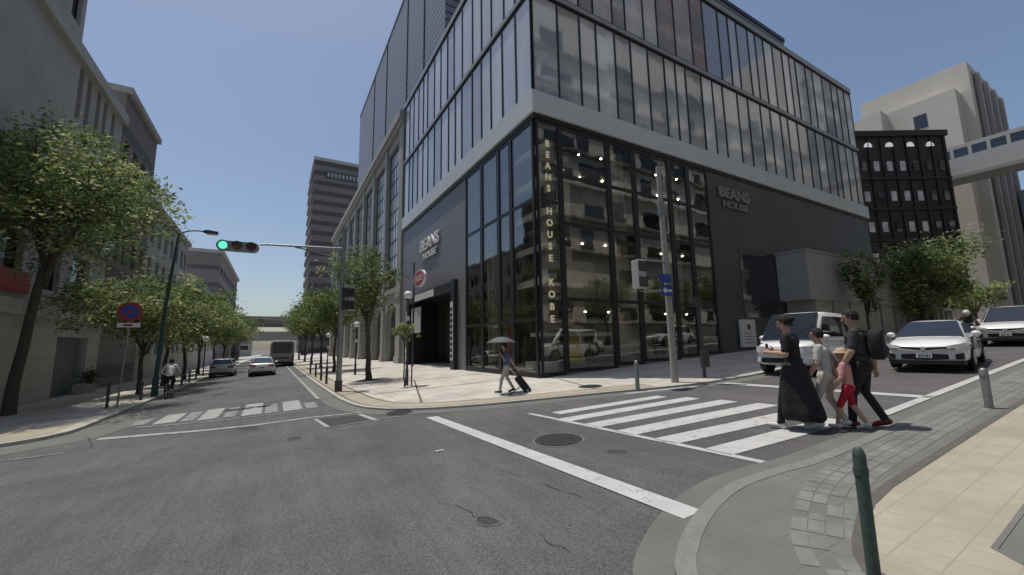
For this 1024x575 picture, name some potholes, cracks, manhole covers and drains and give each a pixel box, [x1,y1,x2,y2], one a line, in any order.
manhole cover [532,433,585,447]
